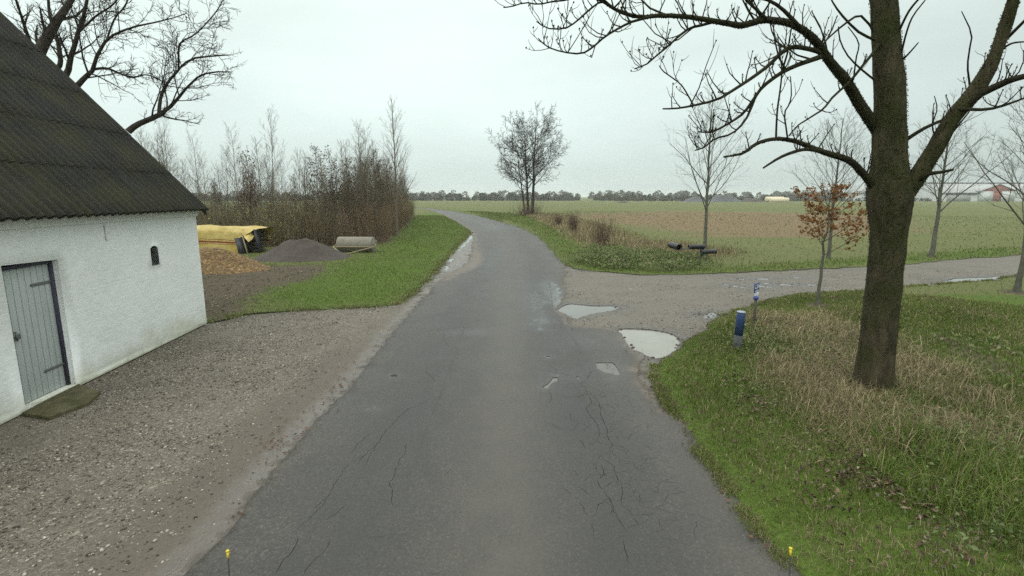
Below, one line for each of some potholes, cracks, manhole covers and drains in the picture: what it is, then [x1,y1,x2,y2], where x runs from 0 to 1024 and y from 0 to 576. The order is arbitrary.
pothole [558,304,618,319]
pothole [618,328,681,358]
pothole [596,362,620,375]
crack [307,403,422,521]
crack [544,370,707,565]
